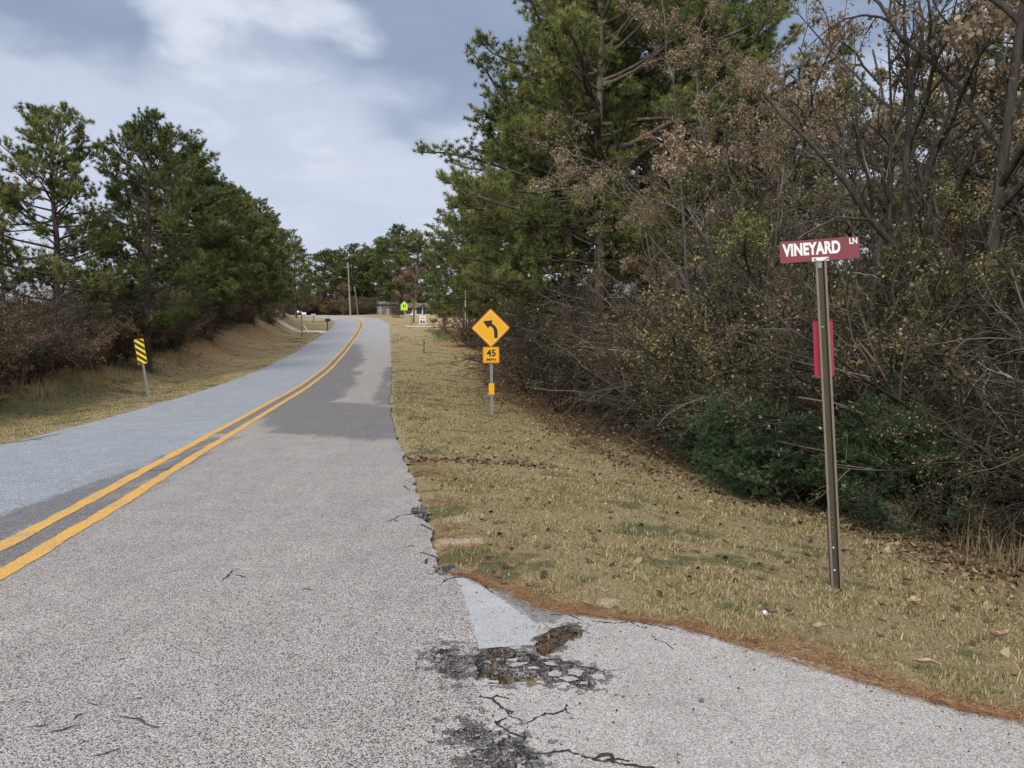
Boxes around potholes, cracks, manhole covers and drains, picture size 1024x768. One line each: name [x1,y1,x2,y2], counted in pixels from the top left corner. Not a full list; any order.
pothole [471,647,607,690]
crack [37,702,121,756]
crack [478,695,655,768]
crack [390,511,493,593]
crack [114,697,160,727]
pothole [532,624,584,653]
